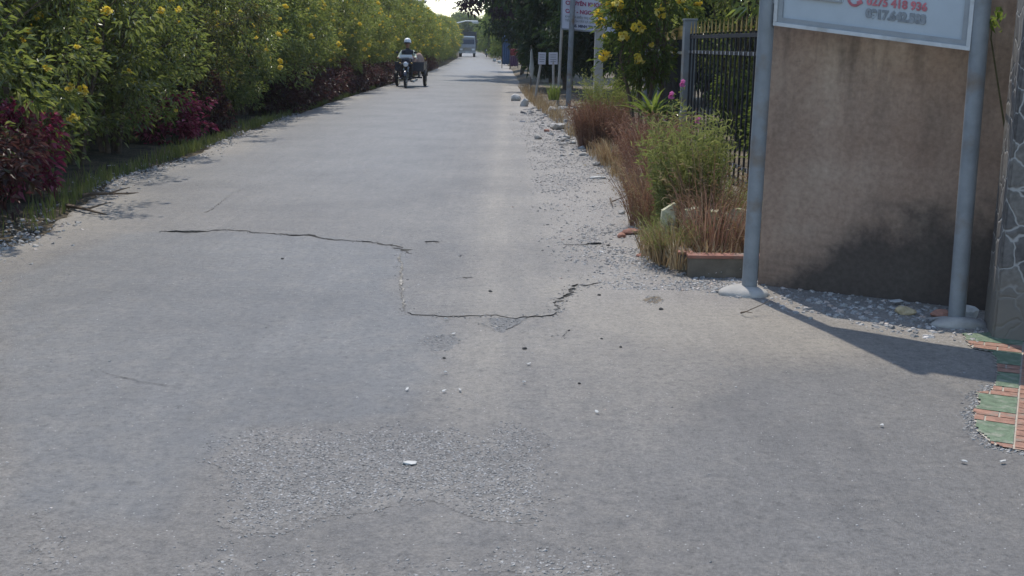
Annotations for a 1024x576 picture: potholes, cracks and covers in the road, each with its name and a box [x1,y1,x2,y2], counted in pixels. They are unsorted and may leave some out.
crack [405,281,606,339]
crack [159,183,438,254]
